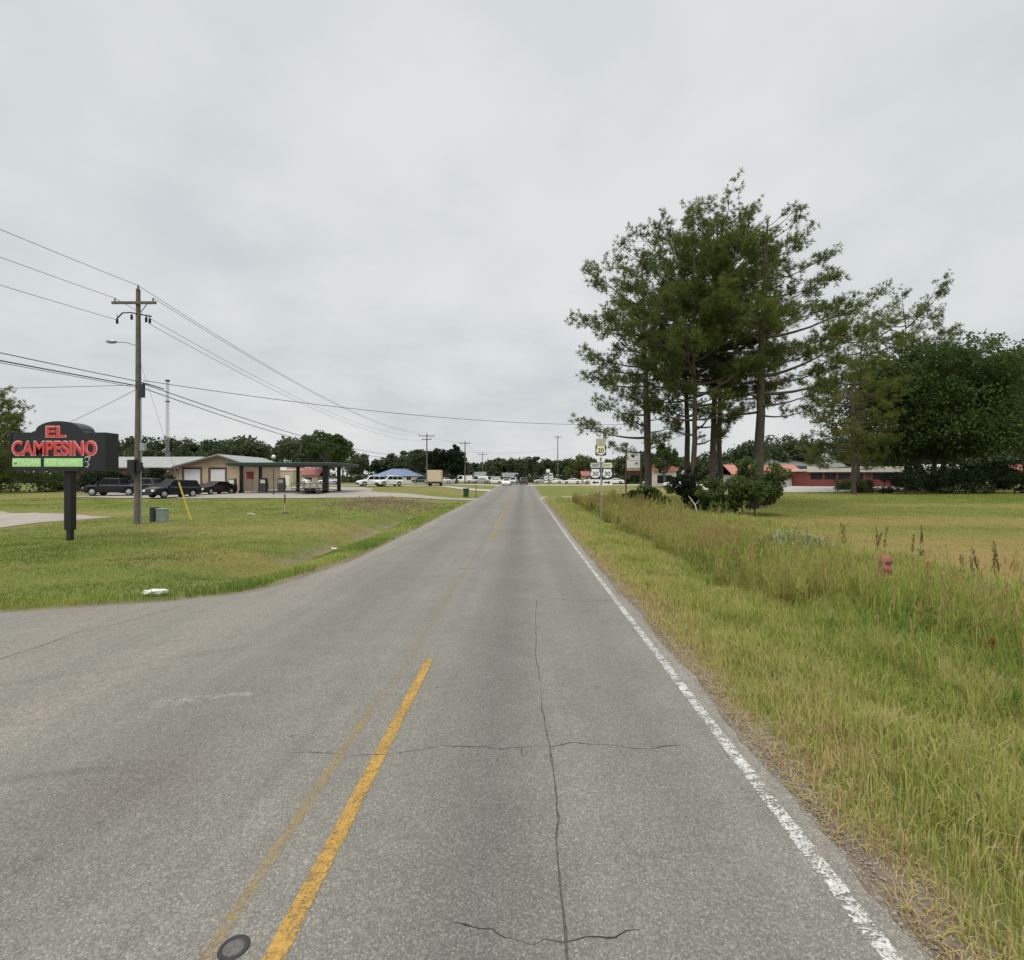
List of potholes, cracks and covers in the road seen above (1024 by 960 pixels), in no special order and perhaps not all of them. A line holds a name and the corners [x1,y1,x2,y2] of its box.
crack [457,922,641,945]
crack [293,742,683,757]
manhole cover [217,934,251,960]
